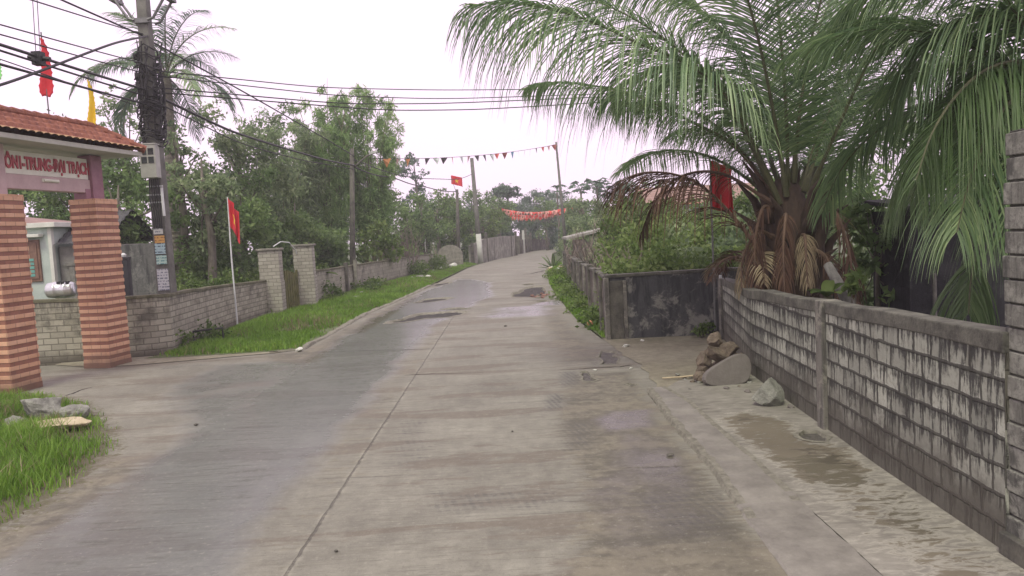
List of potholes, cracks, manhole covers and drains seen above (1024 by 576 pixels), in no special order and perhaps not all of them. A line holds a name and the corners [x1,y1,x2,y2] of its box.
pothole [596,350,621,364]
pothole [579,370,600,382]
pothole [510,285,551,299]
pothole [383,310,469,324]
pothole [793,429,832,443]
